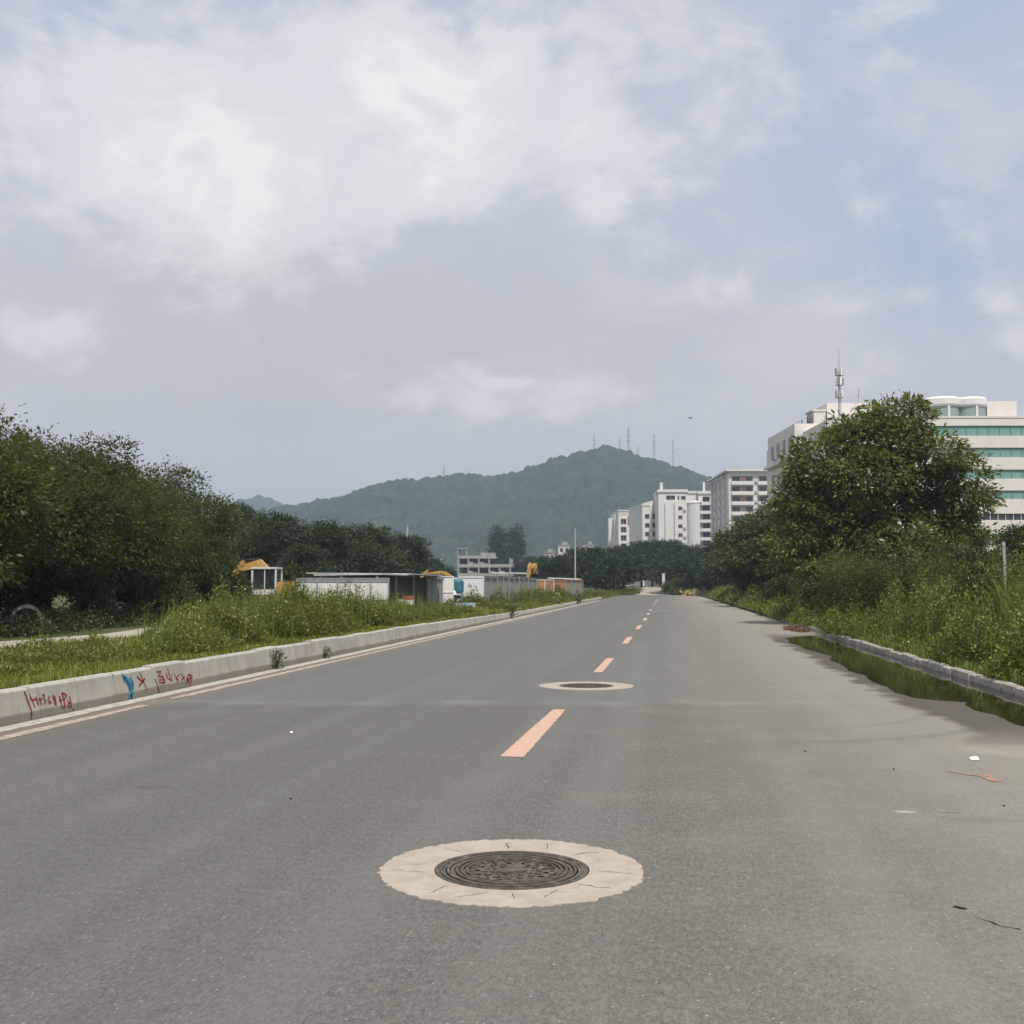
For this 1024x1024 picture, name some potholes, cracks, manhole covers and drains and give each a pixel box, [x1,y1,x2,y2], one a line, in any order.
manhole cover [539,681,634,690]
manhole cover [376,839,644,908]
